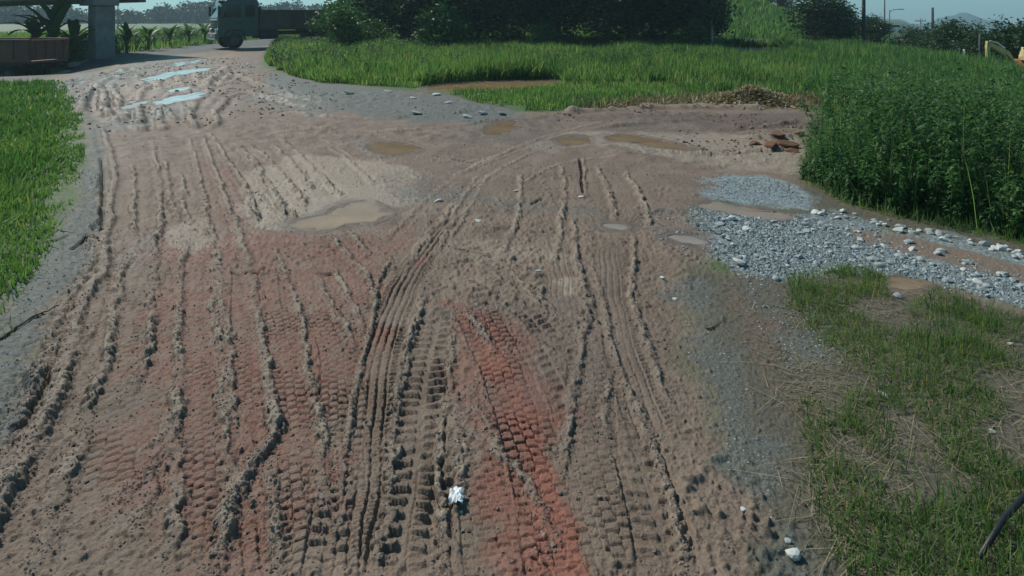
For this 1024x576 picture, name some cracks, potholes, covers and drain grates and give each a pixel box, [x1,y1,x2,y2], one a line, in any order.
pothole [360,141,424,157]
pothole [663,233,712,245]
pothole [146,92,212,107]
pothole [112,100,154,113]
pothole [550,134,591,146]
pothole [603,133,702,152]
pothole [287,200,398,231]
pothole [480,120,523,136]
pothole [130,67,219,82]
pothole [597,221,634,231]
pothole [160,58,210,67]
